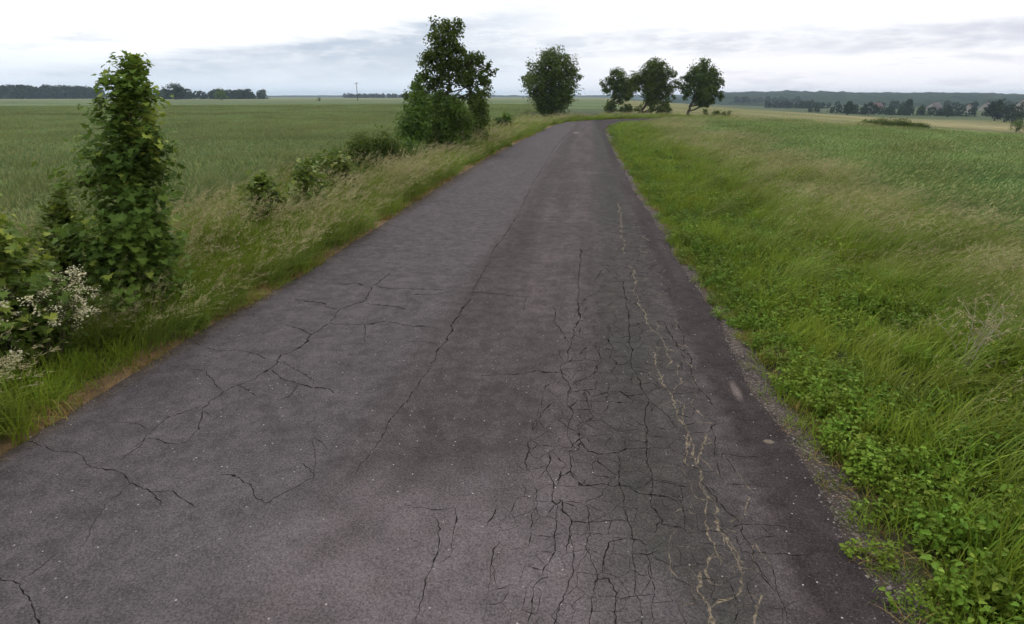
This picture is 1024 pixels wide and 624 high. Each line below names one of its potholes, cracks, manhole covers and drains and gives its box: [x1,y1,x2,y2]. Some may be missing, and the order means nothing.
crack [405,504,458,620]
crack [27,274,526,546]
crack [0,555,54,624]
